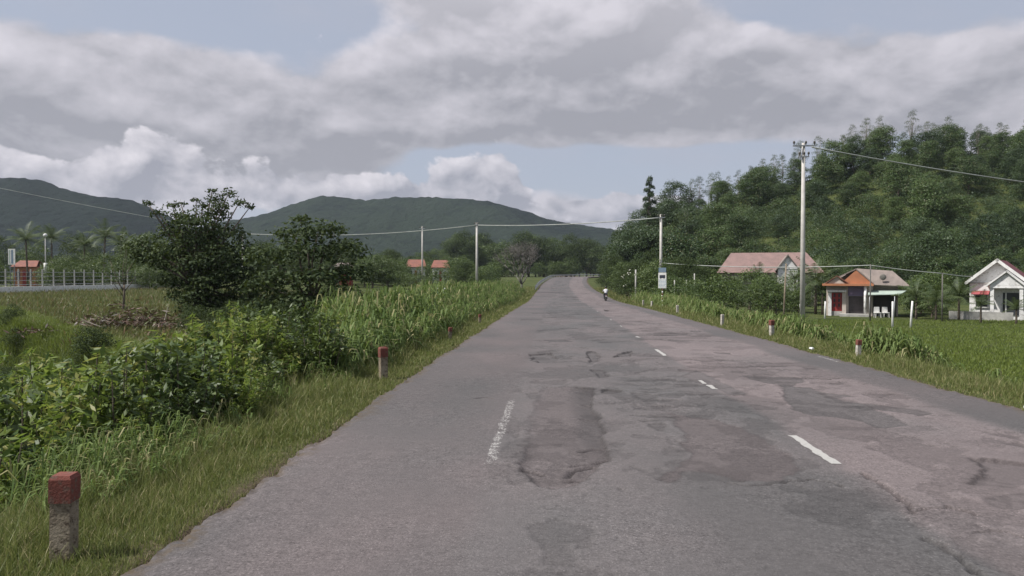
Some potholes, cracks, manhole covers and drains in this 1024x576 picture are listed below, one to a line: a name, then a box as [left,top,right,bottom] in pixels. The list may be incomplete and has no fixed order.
crack [724,471,1024,576]
